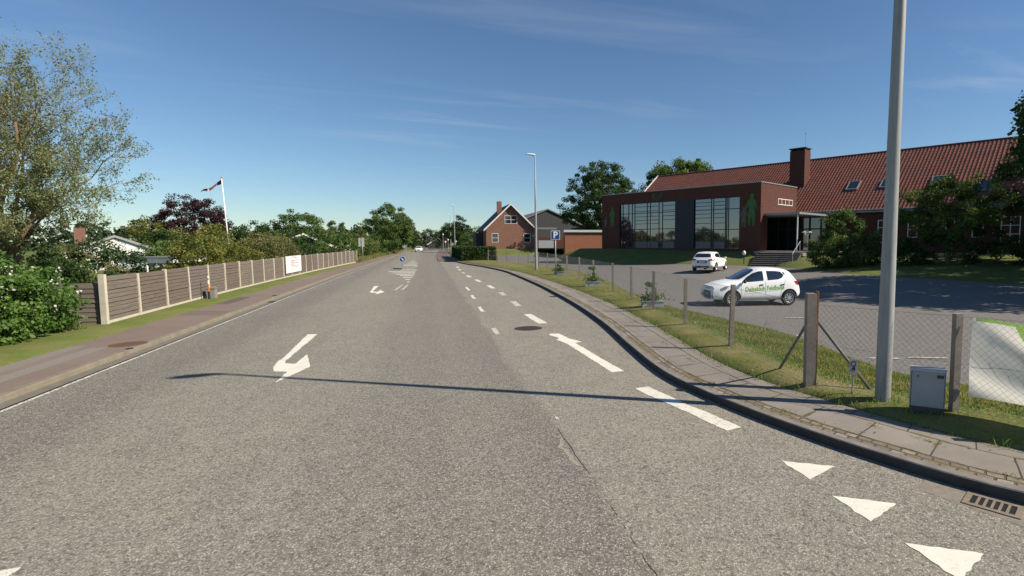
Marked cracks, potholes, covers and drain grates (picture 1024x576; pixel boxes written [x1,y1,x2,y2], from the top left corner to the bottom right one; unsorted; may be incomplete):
crack [558,429,658,576]
drain grate [961,492,1024,520]
